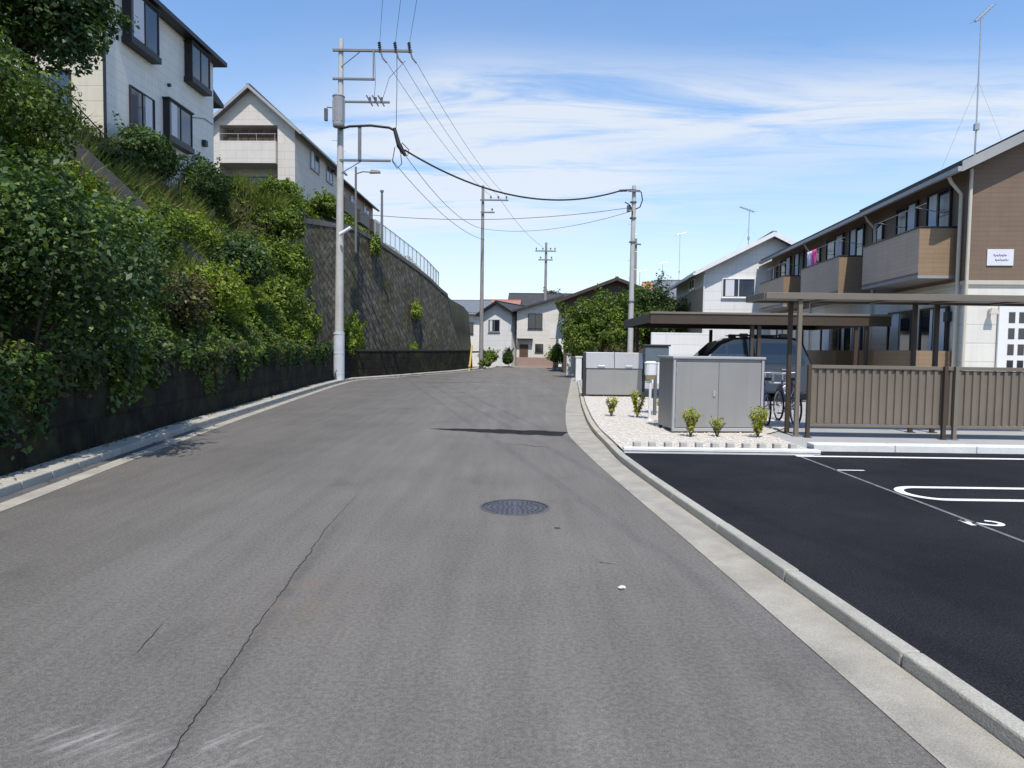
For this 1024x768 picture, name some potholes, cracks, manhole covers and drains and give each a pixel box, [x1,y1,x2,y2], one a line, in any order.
crack [162,495,357,768]
manhole cover [480,499,550,516]
